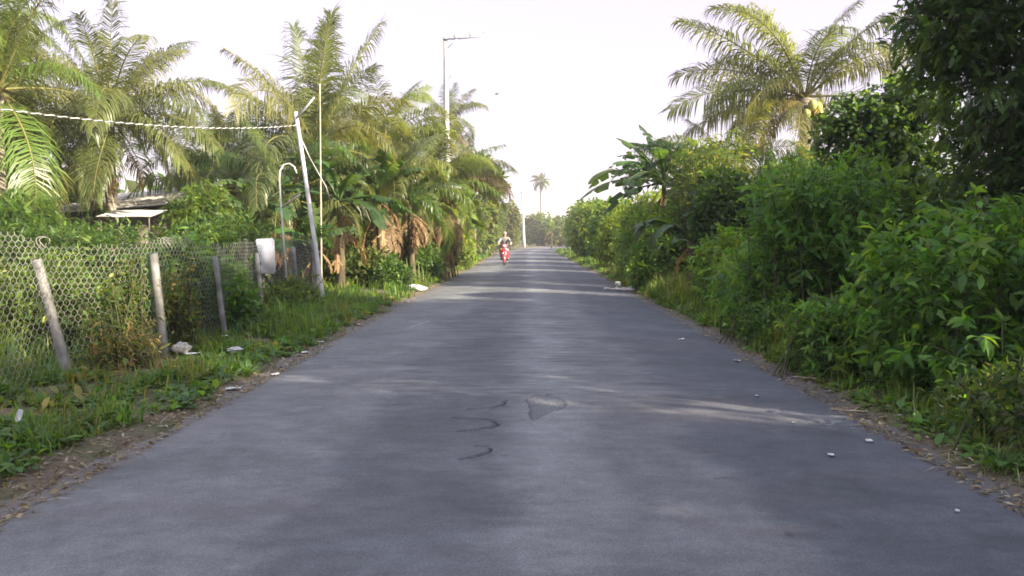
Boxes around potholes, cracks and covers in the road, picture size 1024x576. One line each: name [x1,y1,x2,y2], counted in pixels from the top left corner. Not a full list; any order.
pothole [527,394,567,420]
